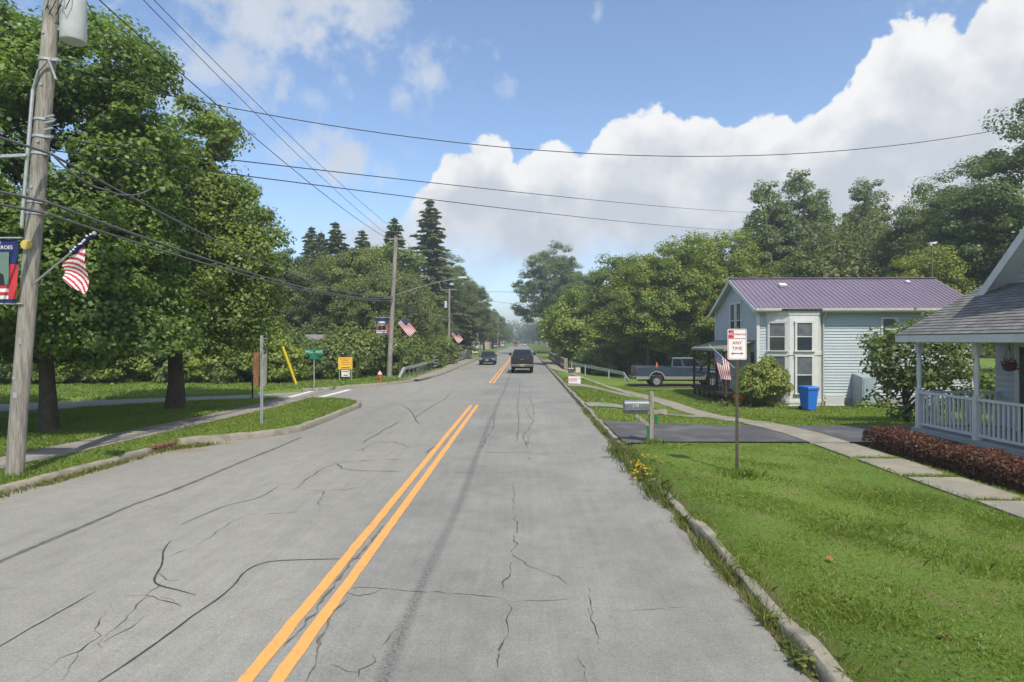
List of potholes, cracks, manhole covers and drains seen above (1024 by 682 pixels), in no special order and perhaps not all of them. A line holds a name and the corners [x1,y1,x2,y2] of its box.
crack [31,441,431,680]
crack [578,589,599,682]
crack [306,388,582,681]
